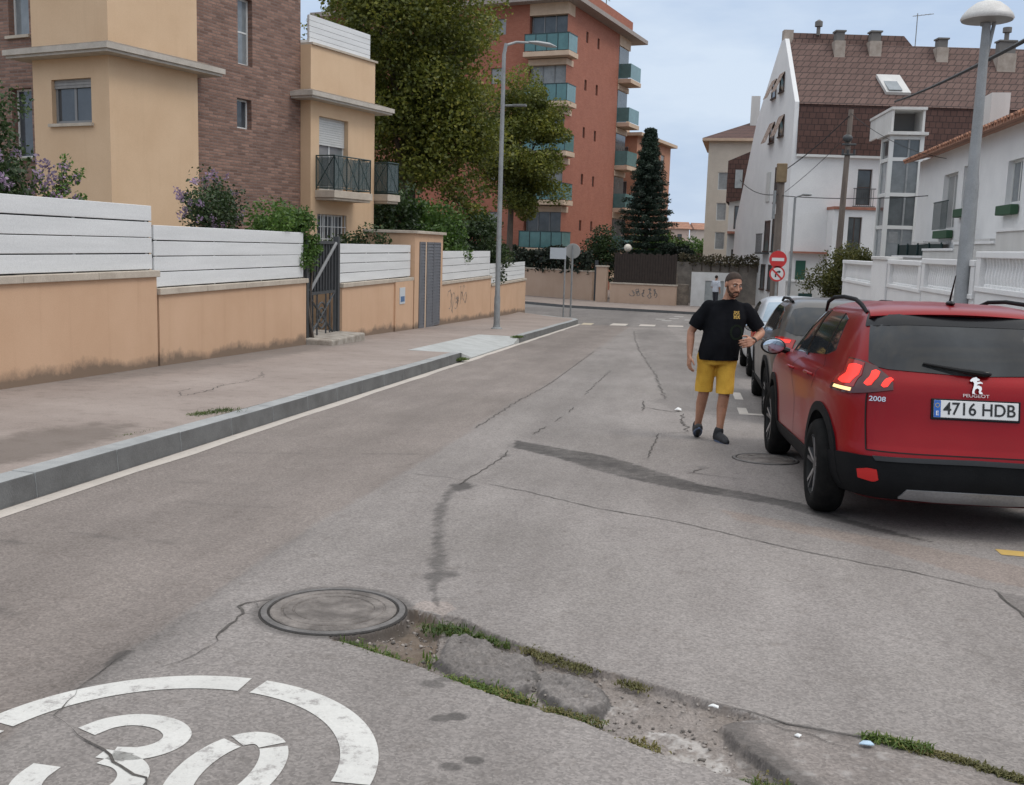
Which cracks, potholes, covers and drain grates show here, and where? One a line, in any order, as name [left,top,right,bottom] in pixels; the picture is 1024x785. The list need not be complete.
pothole [333,610,441,668]
manhole cover [732,453,800,465]
crack [160,599,267,667]
manhole cover [258,588,408,637]
pothole [426,615,797,785]
crack [414,450,1024,617]
crack [54,691,147,785]
crack [608,331,689,457]
